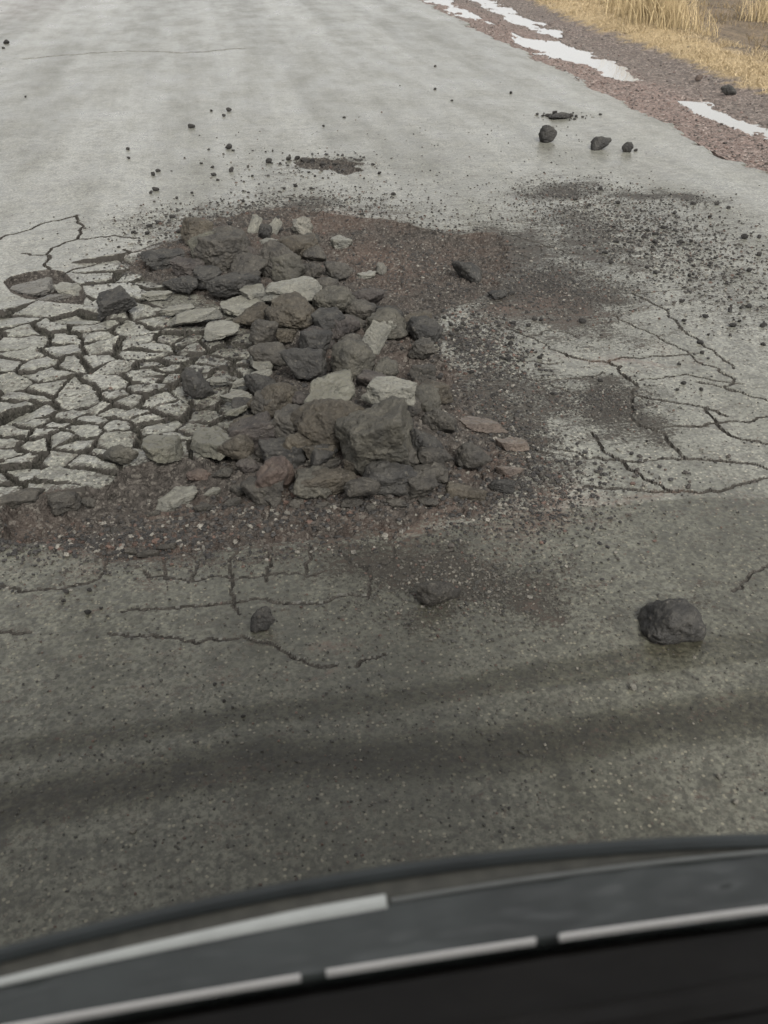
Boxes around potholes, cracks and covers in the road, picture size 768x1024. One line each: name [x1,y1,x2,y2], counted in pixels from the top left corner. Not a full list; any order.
pothole [0,207,513,562]
crack [107,632,387,669]
crack [731,565,768,593]
crack [24,48,238,59]
crack [120,534,455,615]
